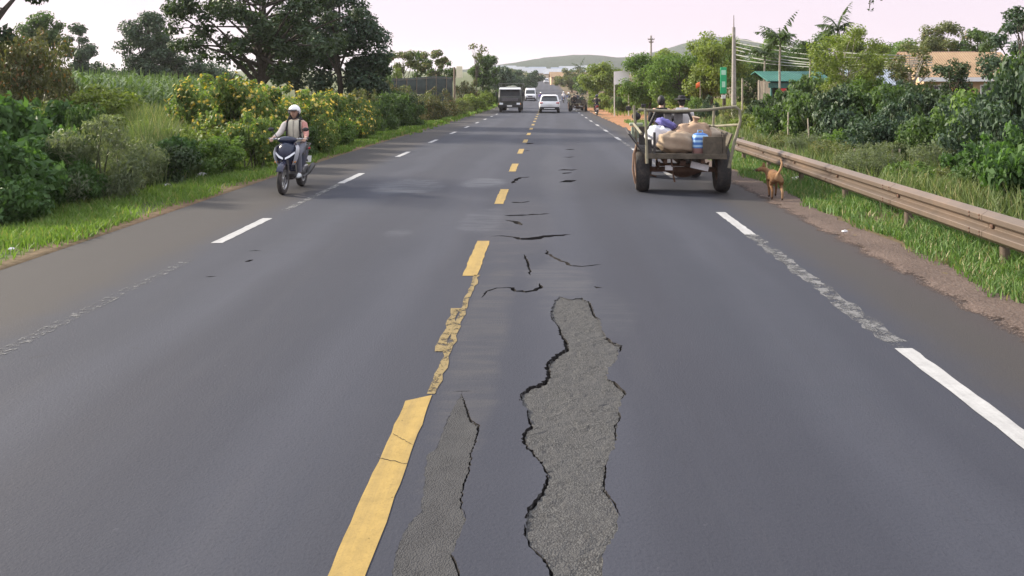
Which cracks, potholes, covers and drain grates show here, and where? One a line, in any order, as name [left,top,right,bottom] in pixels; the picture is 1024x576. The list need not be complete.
crack [481,201,601,298]
